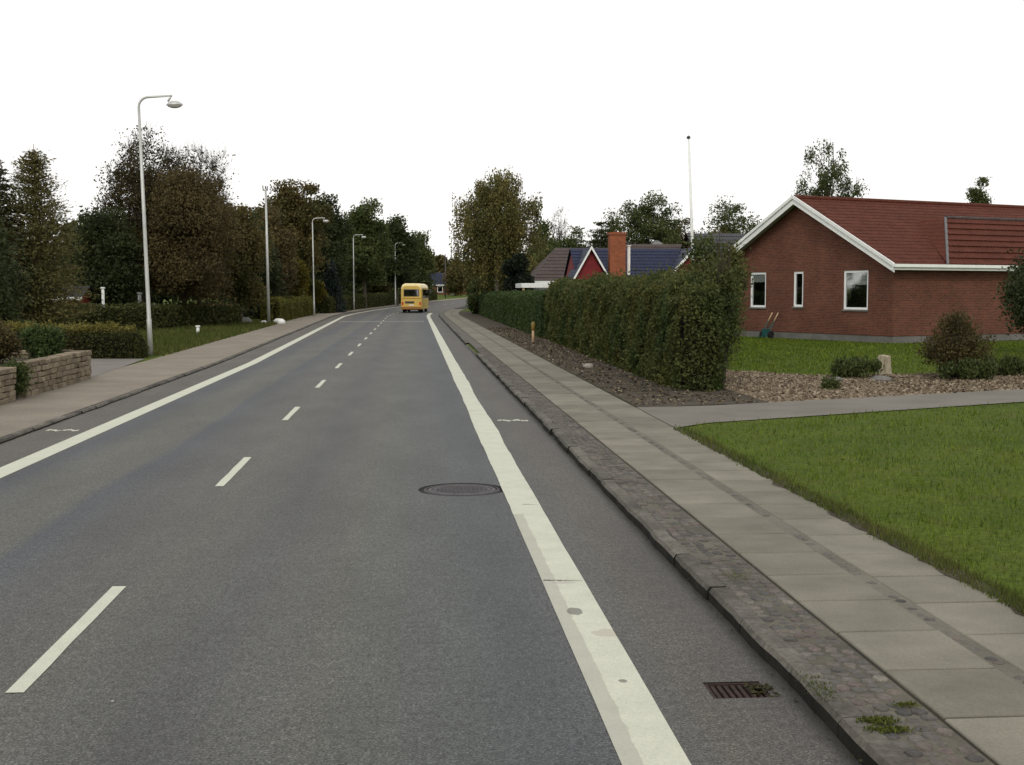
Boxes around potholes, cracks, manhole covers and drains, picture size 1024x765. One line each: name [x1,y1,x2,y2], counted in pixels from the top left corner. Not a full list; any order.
drain grate [702,681,781,699]
manhole cover [418,483,503,496]
